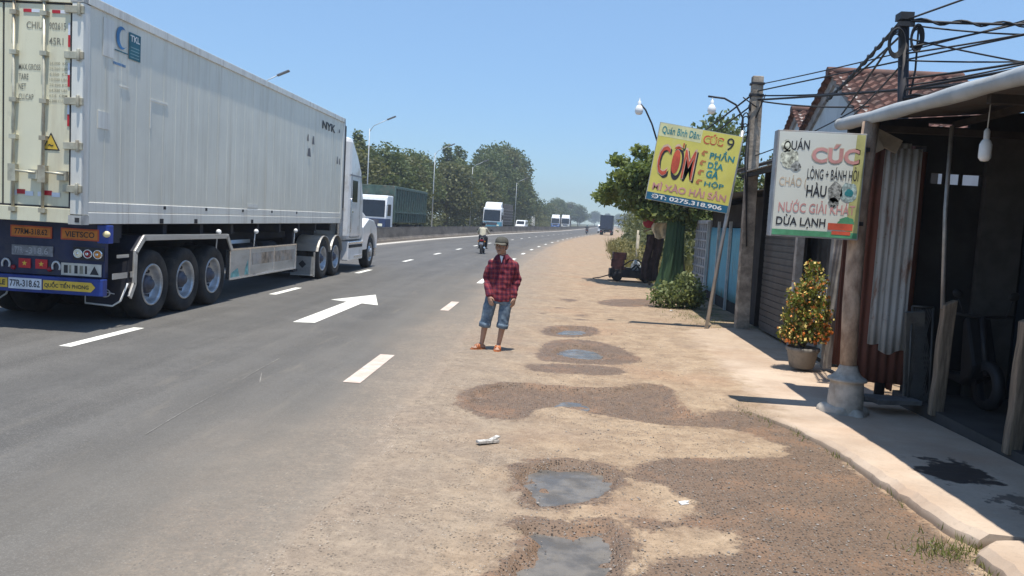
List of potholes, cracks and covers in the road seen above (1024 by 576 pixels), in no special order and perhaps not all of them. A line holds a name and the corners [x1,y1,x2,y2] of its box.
pothole [482,517,644,576]
pothole [545,344,622,361]
pothole [544,326,596,336]
pothole [502,458,635,510]
pothole [455,381,738,429]
